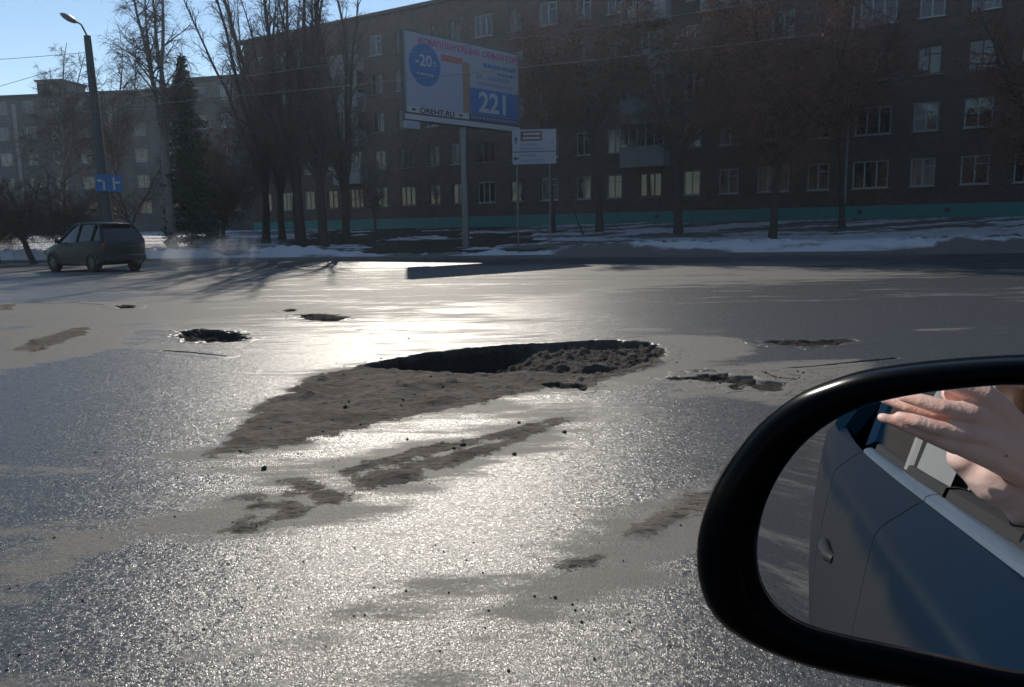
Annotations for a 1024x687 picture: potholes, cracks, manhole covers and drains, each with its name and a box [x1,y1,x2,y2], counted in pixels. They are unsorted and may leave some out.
pothole [648,368,832,397]
pothole [159,328,264,345]
pothole [282,313,364,324]
pothole [344,338,683,379]
pothole [740,337,883,350]
